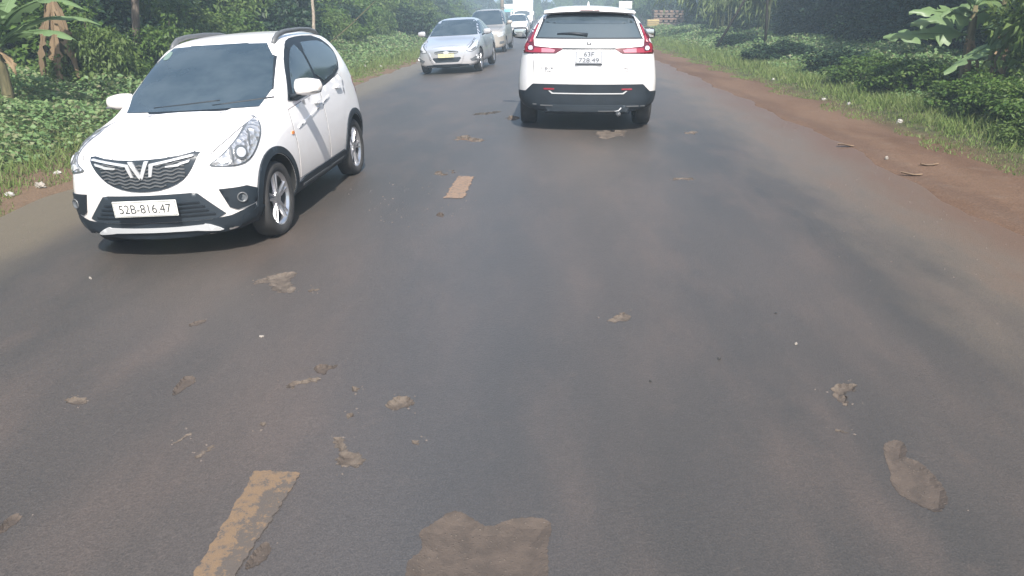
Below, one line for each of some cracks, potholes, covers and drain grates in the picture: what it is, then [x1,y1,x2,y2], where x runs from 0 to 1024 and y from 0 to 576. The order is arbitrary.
pothole [596,130,627,140]
pothole [314,364,337,375]
pothole [172,376,196,395]
pothole [405,511,552,576]
pothole [0,513,22,534]
pothole [245,541,272,569]
pothole [385,396,415,410]
pothole [286,377,321,389]
pothole [607,312,631,323]
pothole [831,383,857,406]
pothole [333,437,366,468]
pothole [64,396,87,405]
